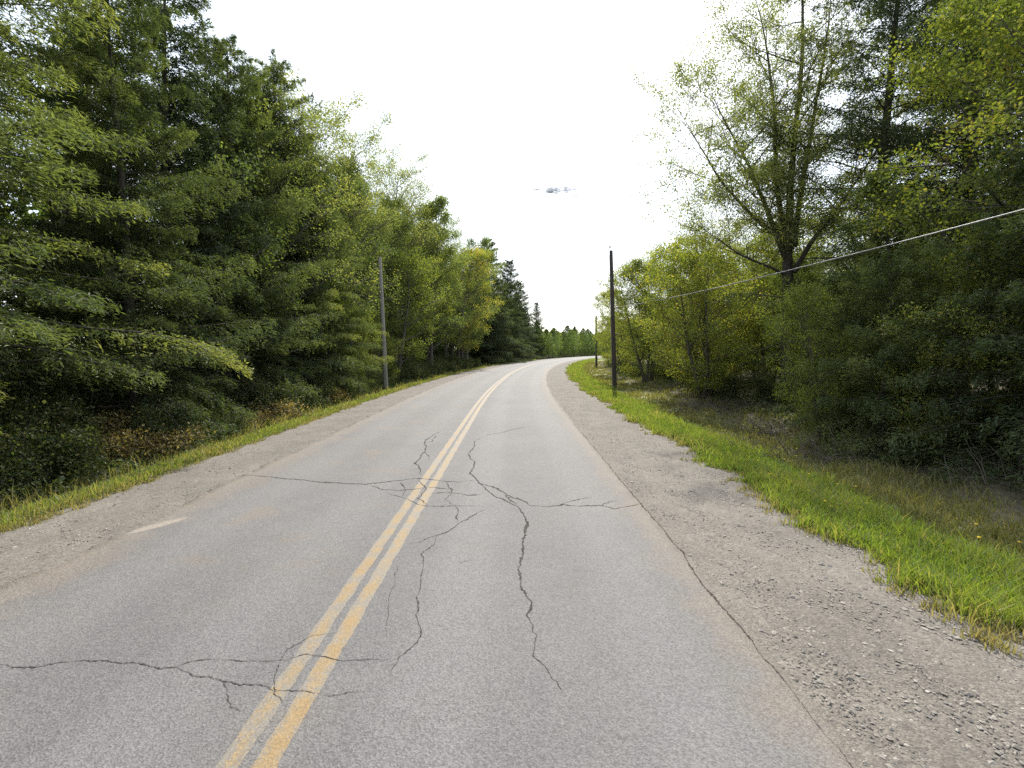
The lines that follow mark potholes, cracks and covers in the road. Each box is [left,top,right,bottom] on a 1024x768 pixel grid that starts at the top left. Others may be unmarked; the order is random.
crack [256,428,854,768]
crack [6,631,392,712]
